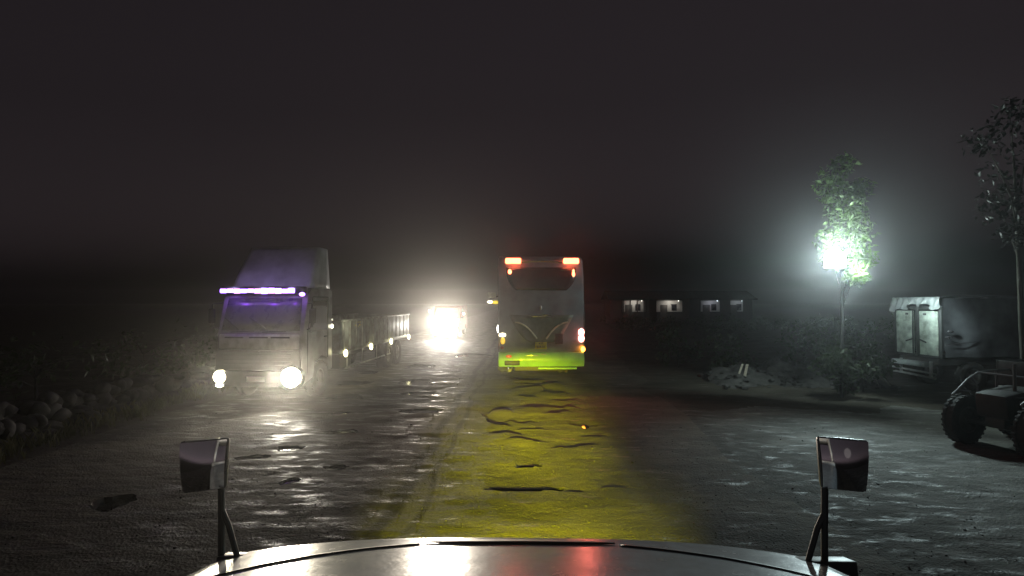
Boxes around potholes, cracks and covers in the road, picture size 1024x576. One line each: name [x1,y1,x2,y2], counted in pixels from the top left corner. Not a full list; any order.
pothole [278,477,301,485]
pothole [88,494,137,512]
pothole [397,378,434,386]
